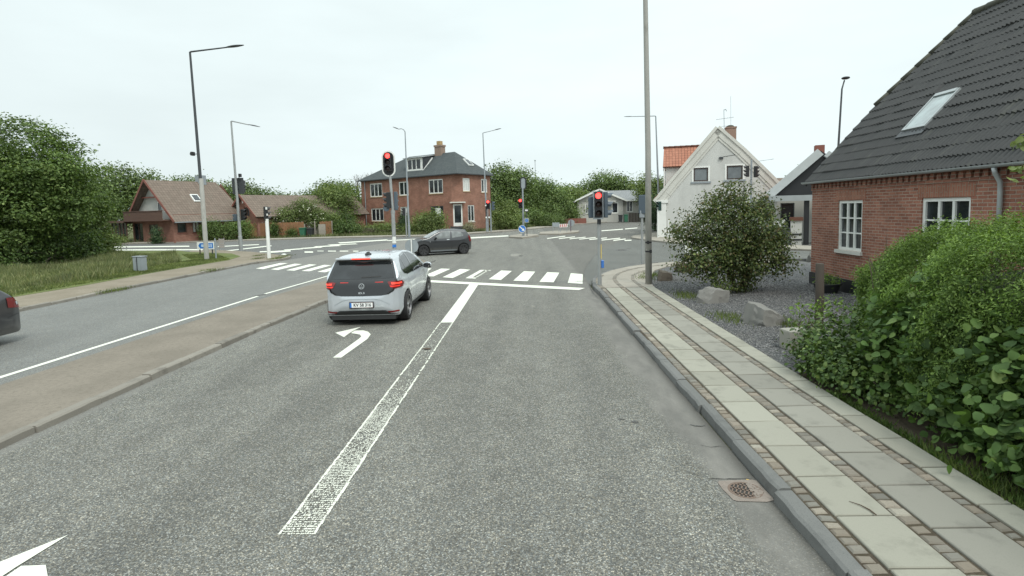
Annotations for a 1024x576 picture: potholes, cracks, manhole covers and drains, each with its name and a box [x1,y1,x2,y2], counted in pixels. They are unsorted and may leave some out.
drain grate [718,480,774,502]
